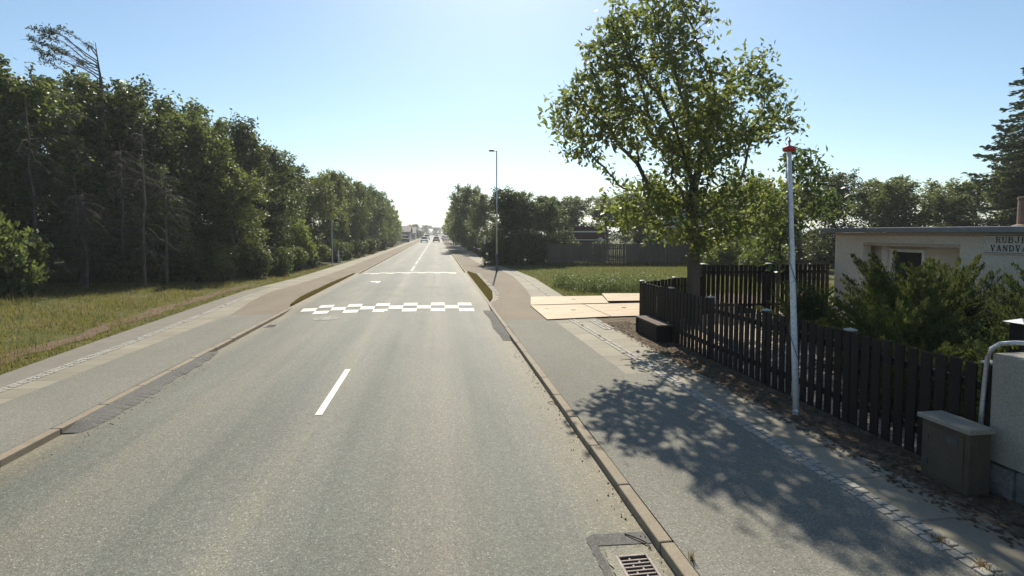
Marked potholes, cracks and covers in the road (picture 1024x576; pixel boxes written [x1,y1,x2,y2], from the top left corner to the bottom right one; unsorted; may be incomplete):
drain grate [605,546,667,576]
